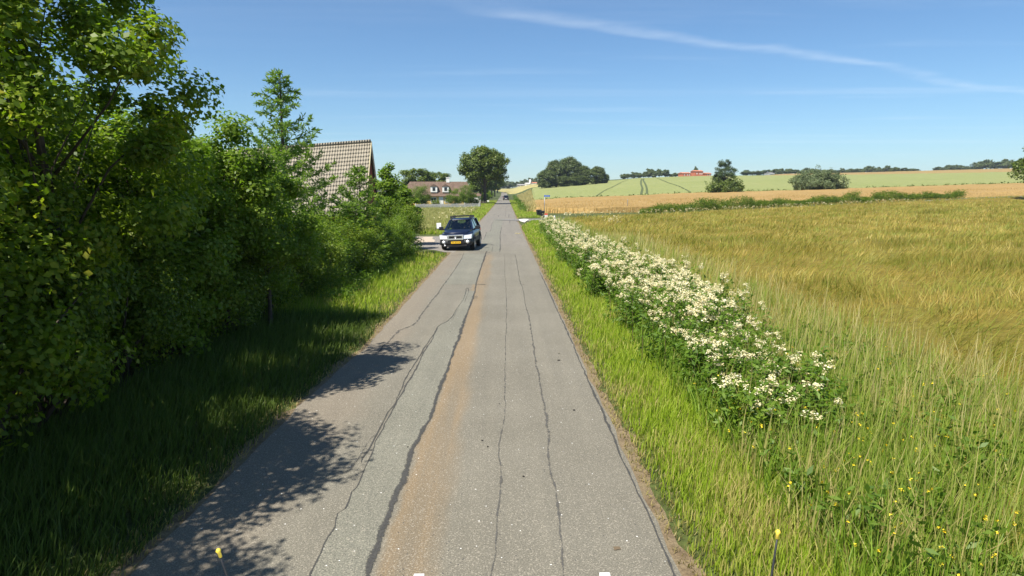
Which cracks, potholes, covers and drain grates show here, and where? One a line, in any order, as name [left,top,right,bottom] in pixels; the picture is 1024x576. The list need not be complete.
crack [490,273,676,576]
crack [309,214,517,576]
